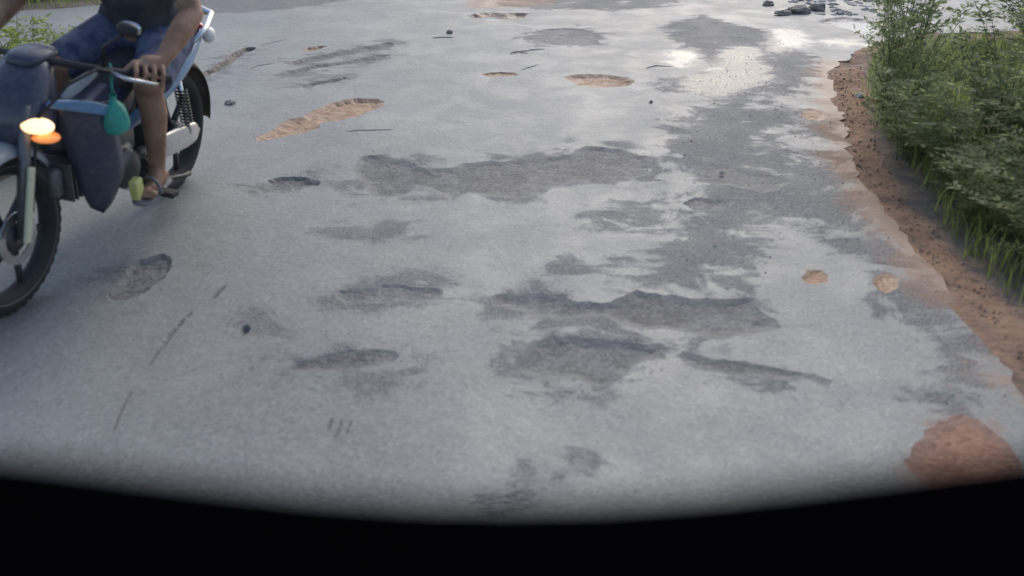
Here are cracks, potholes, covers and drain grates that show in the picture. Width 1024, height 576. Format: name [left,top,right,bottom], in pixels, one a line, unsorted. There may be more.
pothole [903,414,1016,469]
crack [111,284,228,437]
pothole [469,12,529,22]
pothole [872,273,899,293]
pothole [100,253,172,301]
pothole [565,74,635,88]
pothole [254,98,385,142]
pothole [801,270,829,285]
pothole [263,177,321,190]
